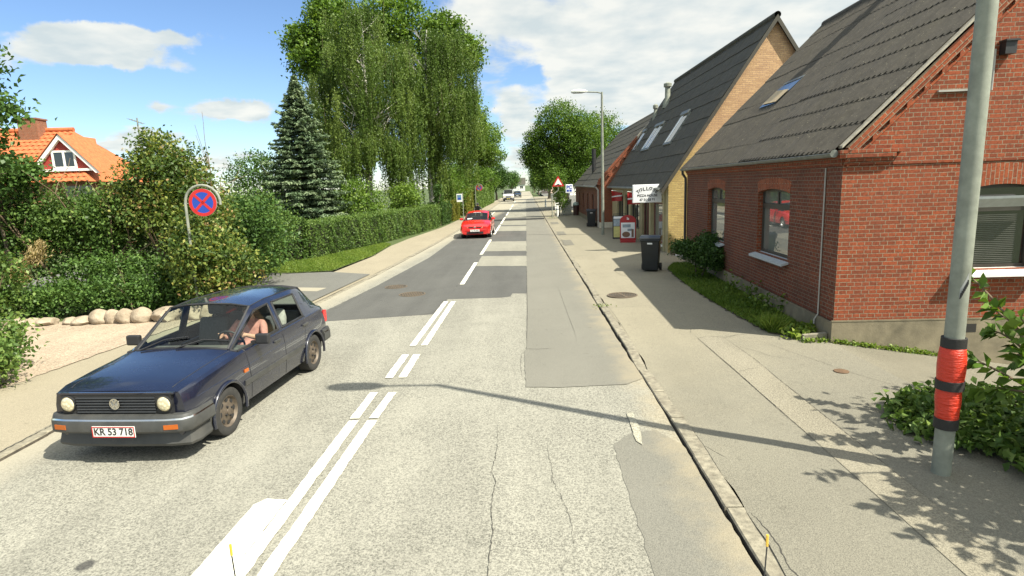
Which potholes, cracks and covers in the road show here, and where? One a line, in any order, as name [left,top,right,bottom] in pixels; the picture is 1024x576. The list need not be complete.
crack [487,434,498,576]
